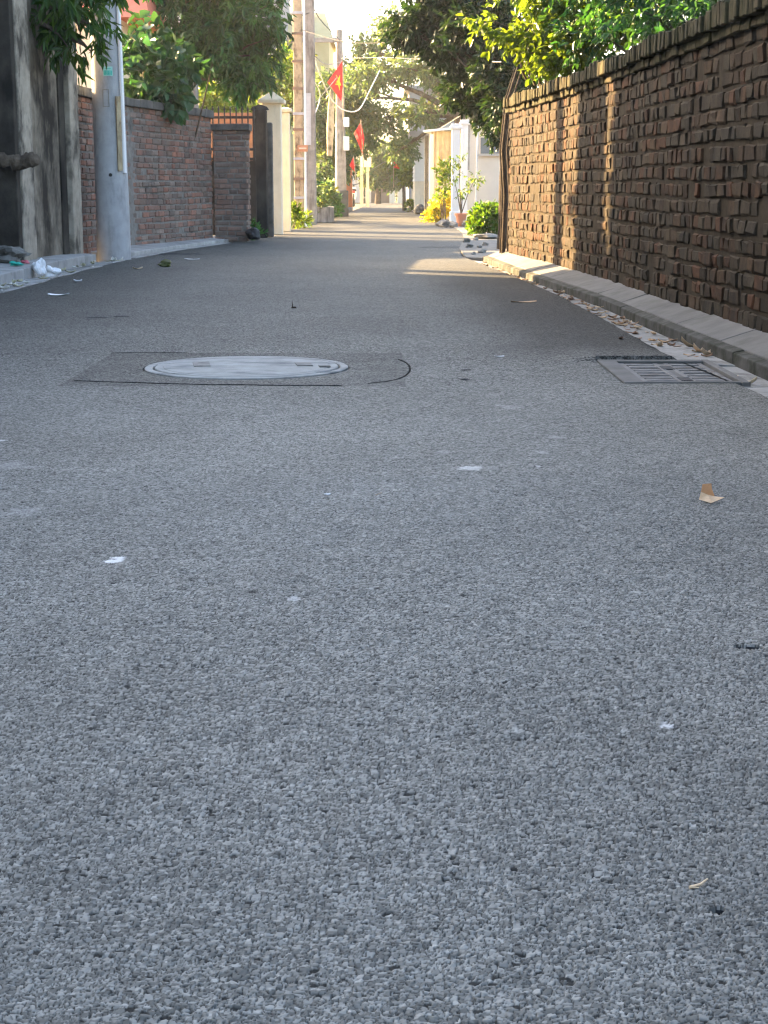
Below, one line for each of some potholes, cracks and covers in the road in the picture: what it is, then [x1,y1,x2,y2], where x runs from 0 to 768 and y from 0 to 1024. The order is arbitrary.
manhole cover [144,356,348,380]
drain grate [596,359,751,387]
